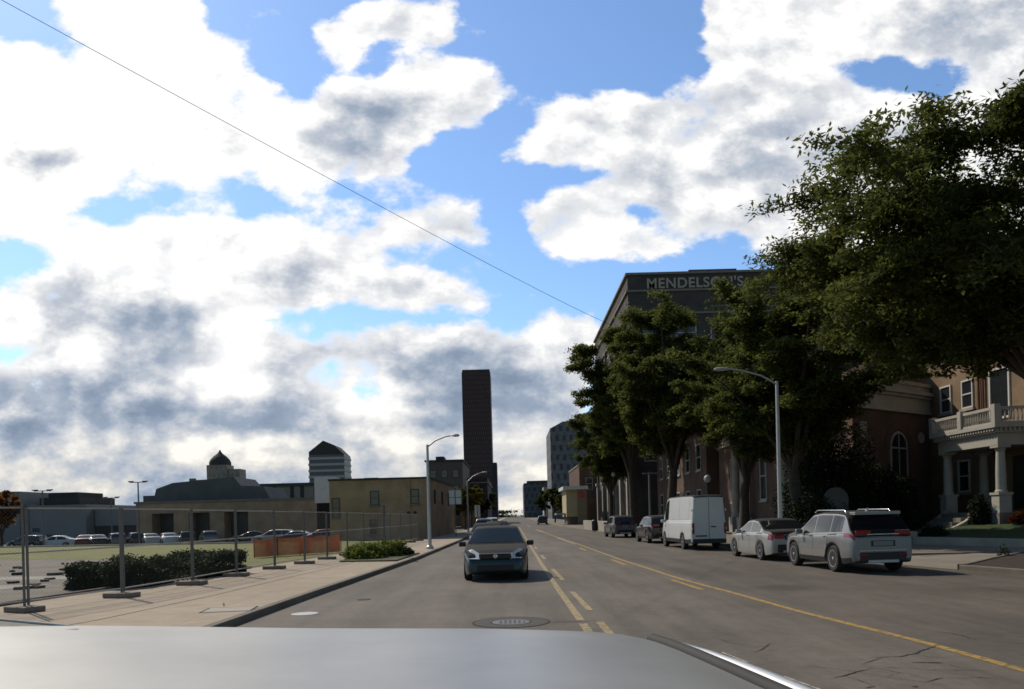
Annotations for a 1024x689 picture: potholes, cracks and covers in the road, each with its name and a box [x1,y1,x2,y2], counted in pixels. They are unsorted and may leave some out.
crack [814,632,1010,688]
manhole cover [472,617,550,628]
